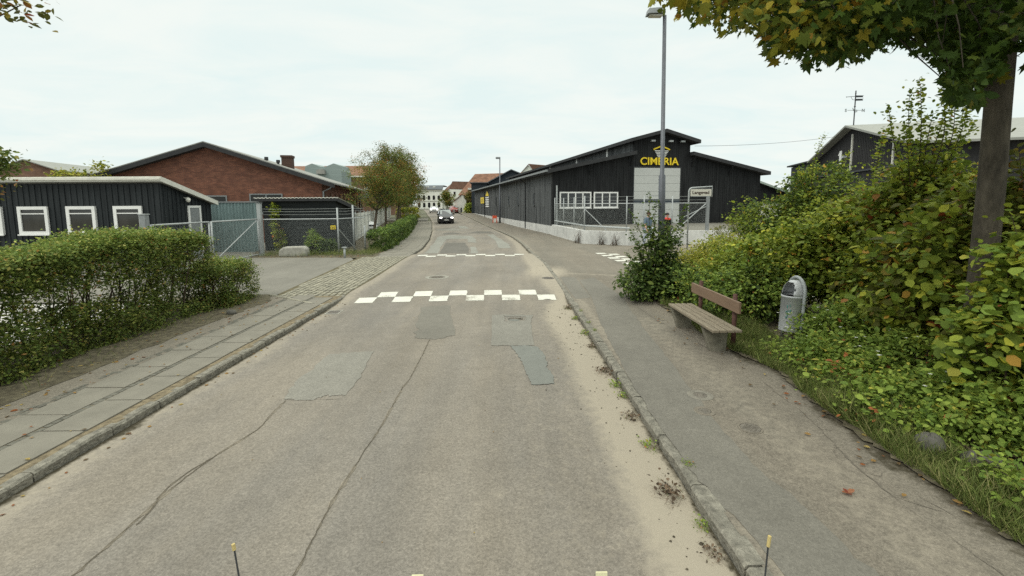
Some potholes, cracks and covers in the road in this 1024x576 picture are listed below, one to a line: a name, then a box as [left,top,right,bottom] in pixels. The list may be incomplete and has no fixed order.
crack [72,400,286,576]
manhole cover [687,390,714,401]
manhole cover [738,422,764,434]
crack [292,338,440,576]
manhole cover [694,406,716,416]
